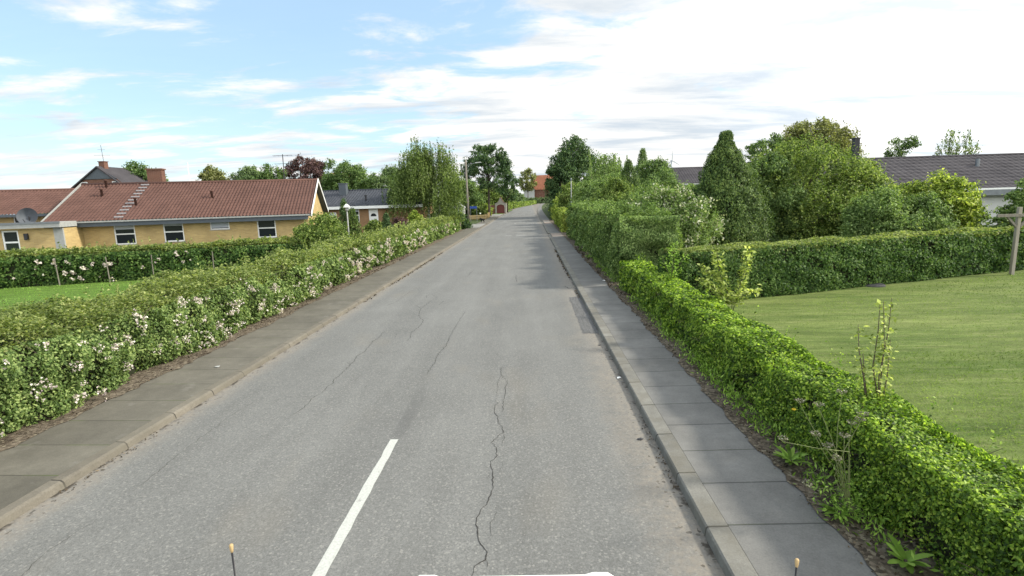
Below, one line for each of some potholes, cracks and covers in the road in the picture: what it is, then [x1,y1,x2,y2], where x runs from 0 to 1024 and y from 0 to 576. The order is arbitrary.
crack [472,367,508,575]
crack [290,290,443,416]
